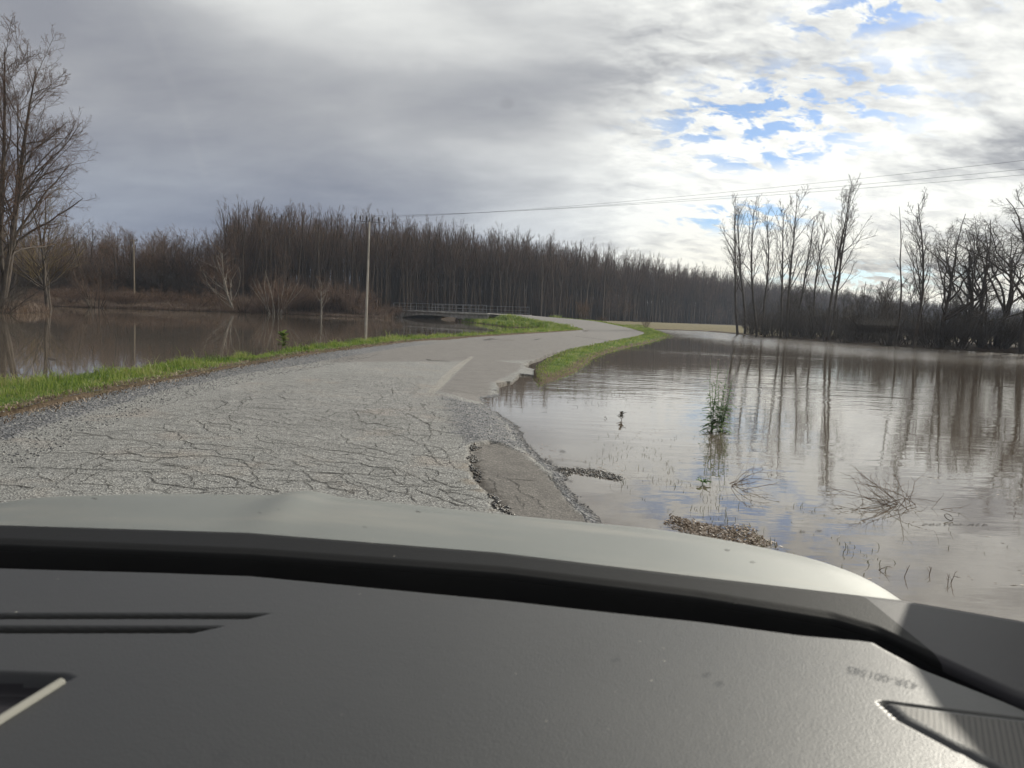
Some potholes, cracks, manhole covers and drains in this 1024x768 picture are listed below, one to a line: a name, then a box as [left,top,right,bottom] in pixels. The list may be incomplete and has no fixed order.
pothole [463,440,595,523]
crack [0,371,483,509]
